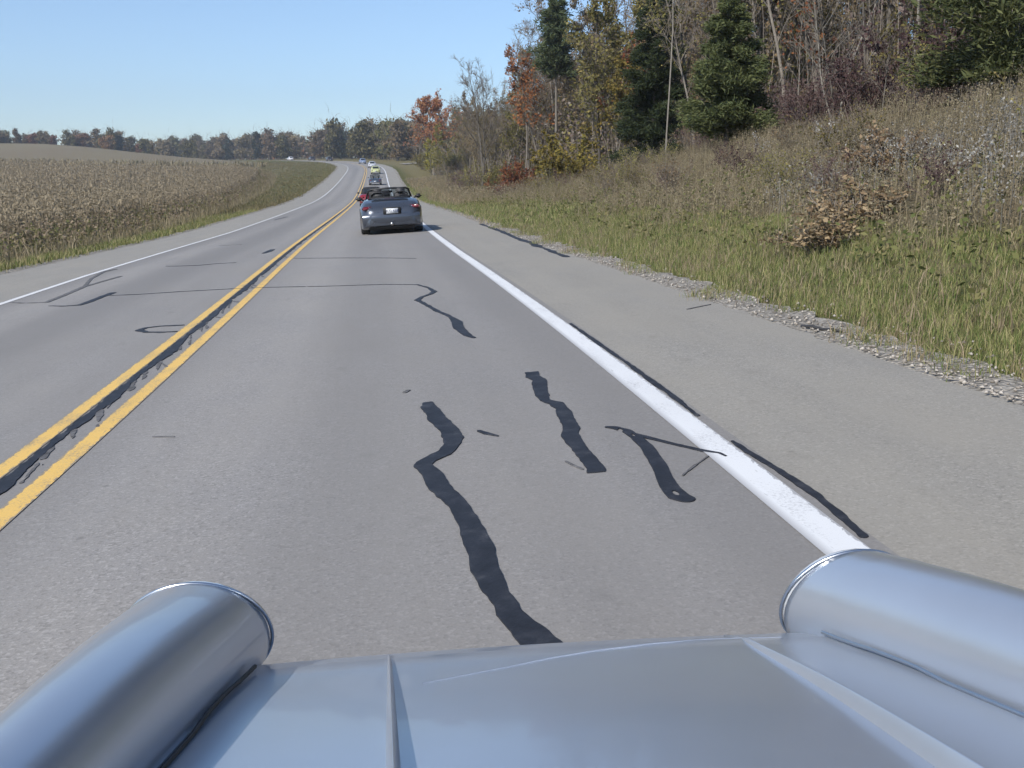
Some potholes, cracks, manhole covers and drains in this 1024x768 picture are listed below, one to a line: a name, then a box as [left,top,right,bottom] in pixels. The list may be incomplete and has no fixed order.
crack [10,269,476,338]
crack [402,371,727,645]
